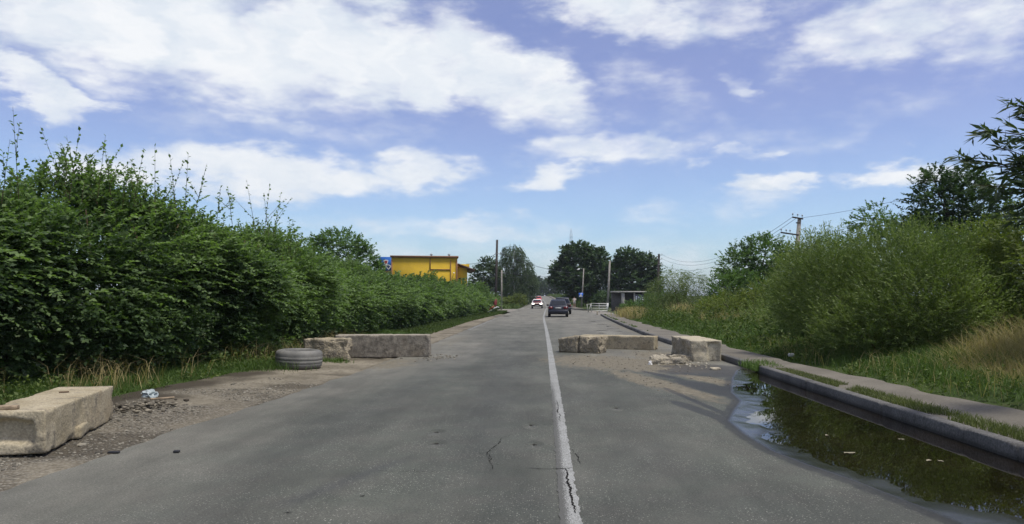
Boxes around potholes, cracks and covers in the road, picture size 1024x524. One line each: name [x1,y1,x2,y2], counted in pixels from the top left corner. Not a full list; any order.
pothole [424,440,447,449]
crack [537,449,580,513]
